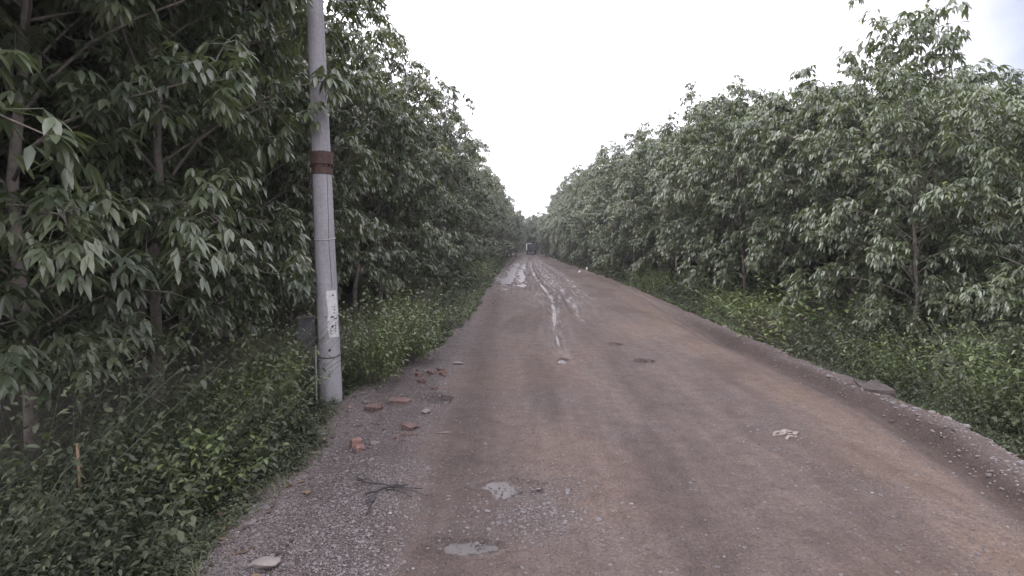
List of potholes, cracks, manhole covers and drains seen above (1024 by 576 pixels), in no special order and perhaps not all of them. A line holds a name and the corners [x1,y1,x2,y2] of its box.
pothole [415,391,462,408]
pothole [399,534,533,562]
pothole [627,357,662,365]
